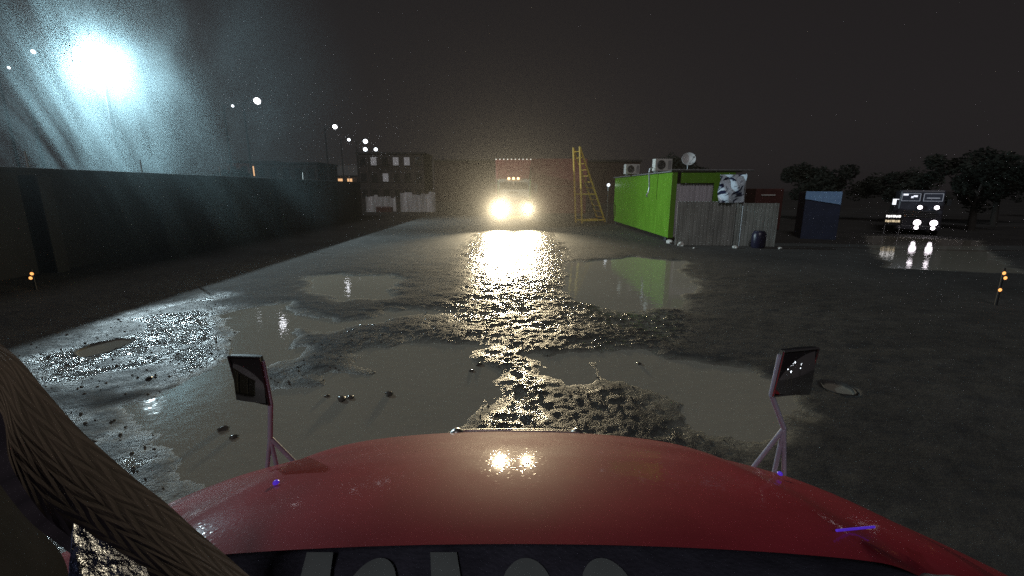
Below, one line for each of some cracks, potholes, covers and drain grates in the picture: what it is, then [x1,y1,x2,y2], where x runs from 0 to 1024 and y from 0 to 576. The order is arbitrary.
pothole [73,338,134,358]
